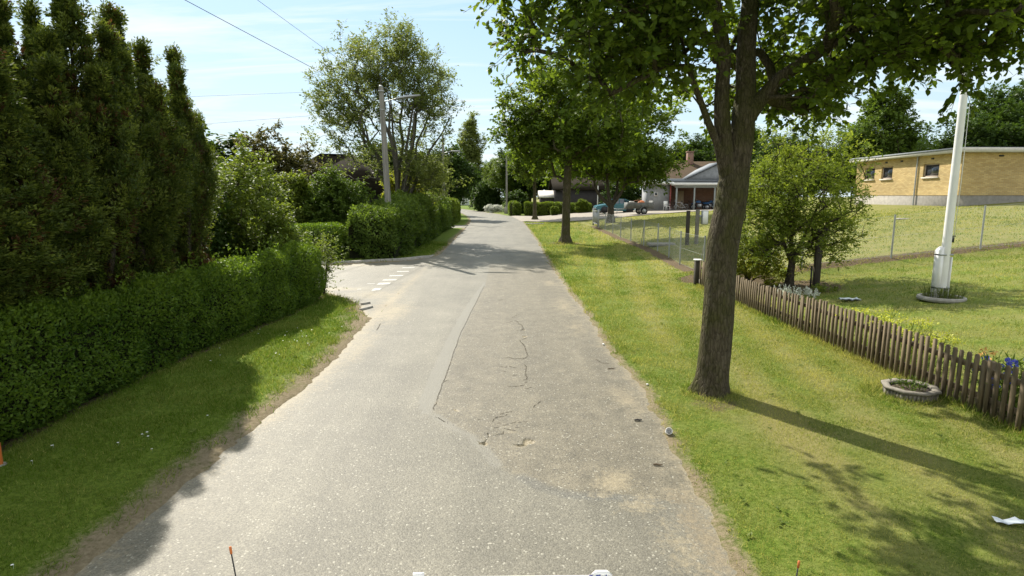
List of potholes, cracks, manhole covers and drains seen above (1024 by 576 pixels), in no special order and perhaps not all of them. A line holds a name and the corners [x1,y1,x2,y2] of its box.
pothole [511,438,536,447]
crack [478,317,539,435]
